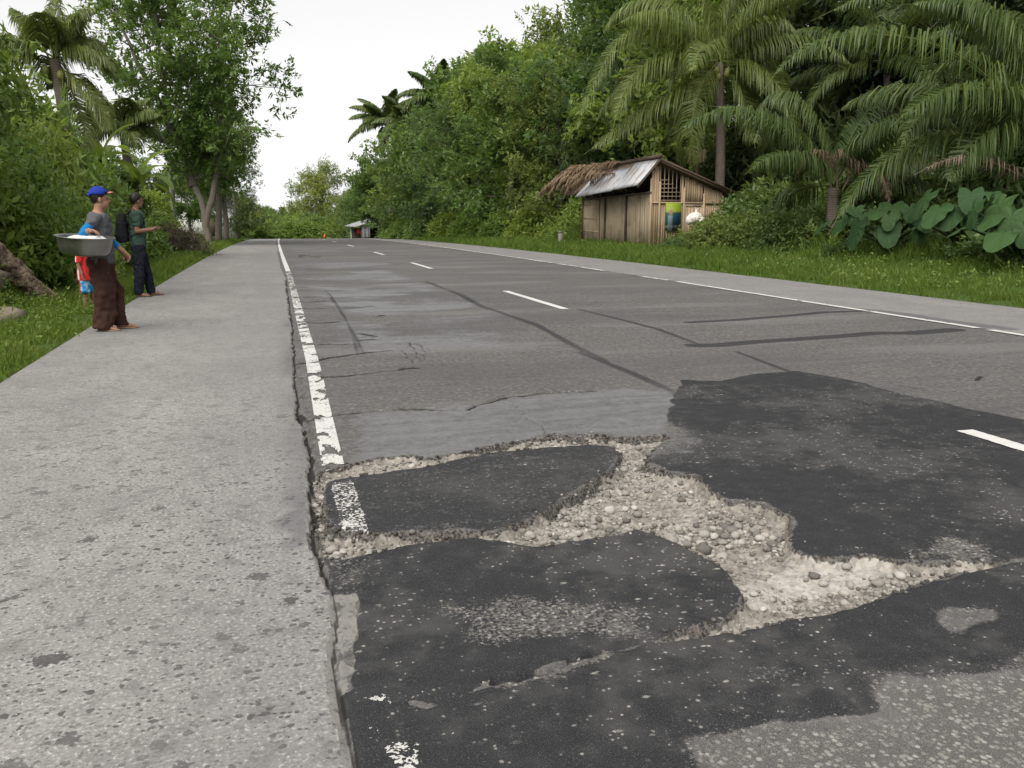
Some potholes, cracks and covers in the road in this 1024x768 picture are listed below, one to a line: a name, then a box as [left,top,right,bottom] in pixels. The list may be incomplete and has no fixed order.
pothole [303,433,1010,642]
crack [283,268,602,768]
